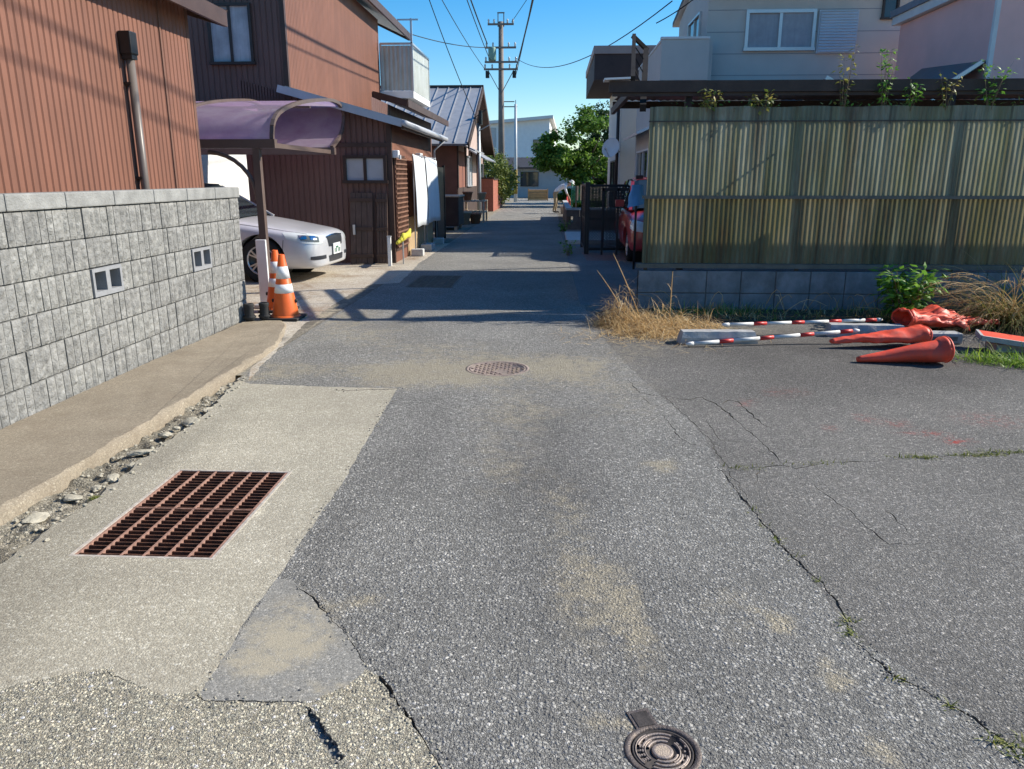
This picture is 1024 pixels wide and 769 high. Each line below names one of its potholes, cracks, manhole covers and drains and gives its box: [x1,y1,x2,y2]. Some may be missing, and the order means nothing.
crack [197,588,443,769]
crack [629,381,1024,764]
manhole cover [624,708,702,769]
manhole cover [466,361,529,376]
drain grate [68,469,292,560]
